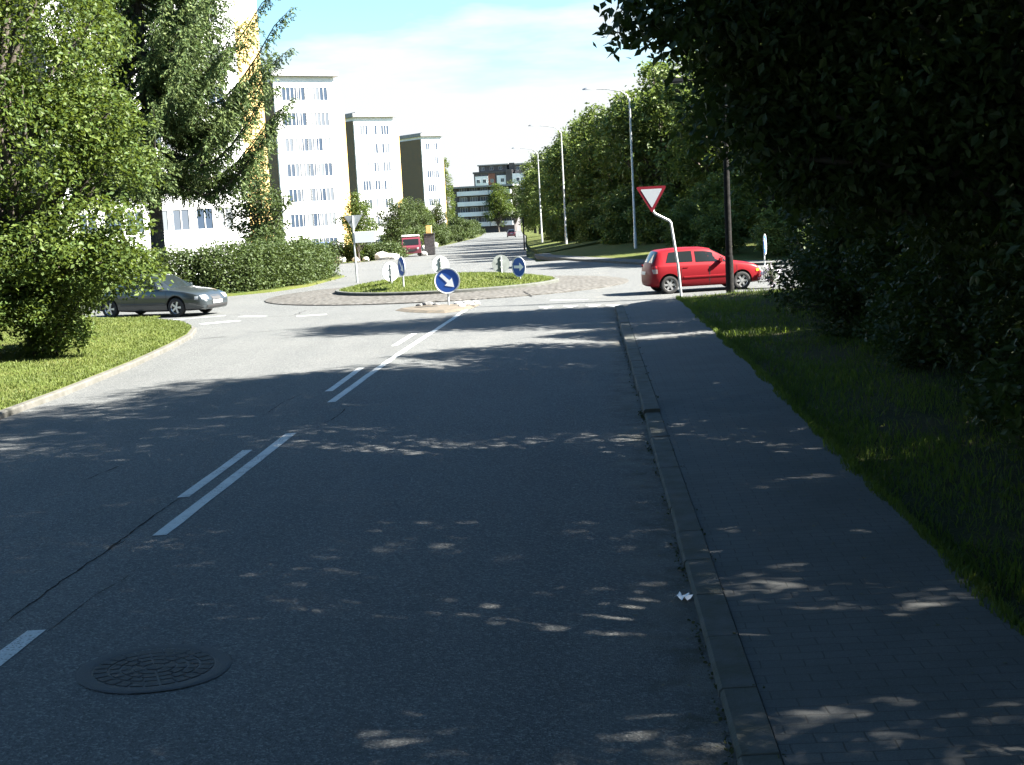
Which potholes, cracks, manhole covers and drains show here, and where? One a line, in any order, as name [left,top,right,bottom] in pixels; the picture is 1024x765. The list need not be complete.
manhole cover [74,644,233,694]
